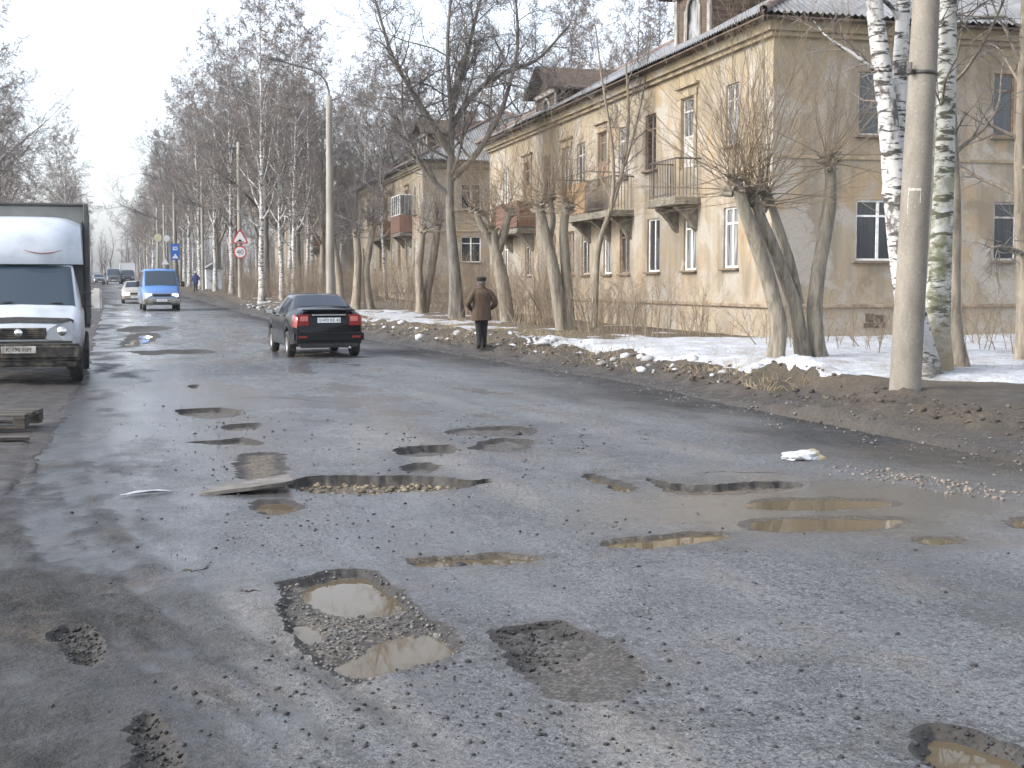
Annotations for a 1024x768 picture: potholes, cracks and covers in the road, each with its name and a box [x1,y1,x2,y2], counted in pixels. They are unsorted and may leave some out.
pothole [247,499,308,515]
pothole [231,452,292,481]
pothole [119,710,189,768]
pothole [581,474,639,493]
pothole [287,475,492,495]
pothole [43,623,108,667]
pothole [645,478,805,496]
pothole [392,444,458,457]
pothole [117,333,161,347]
pothole [906,723,1024,768]
pothole [174,407,243,419]
pothole [467,437,535,453]
